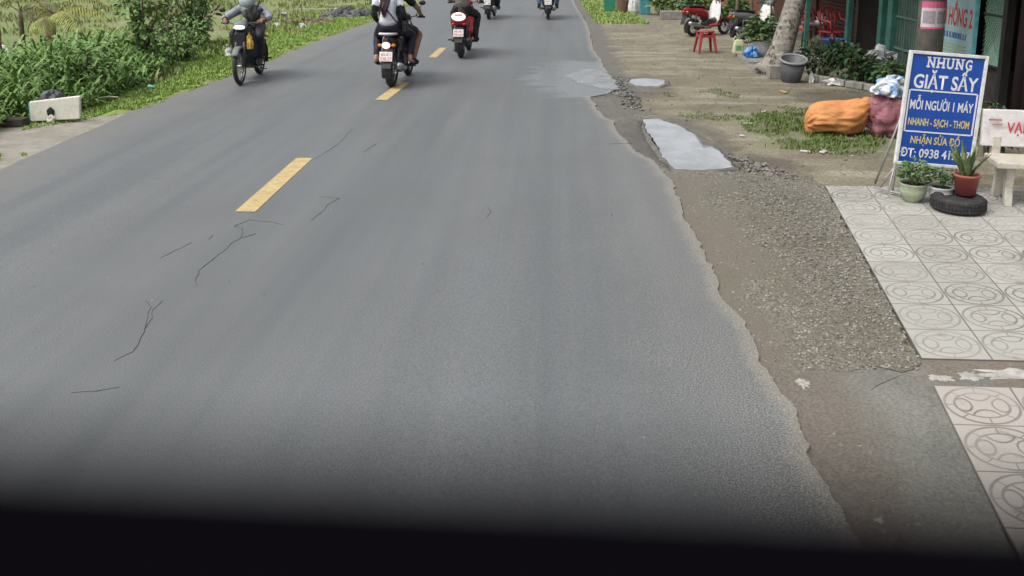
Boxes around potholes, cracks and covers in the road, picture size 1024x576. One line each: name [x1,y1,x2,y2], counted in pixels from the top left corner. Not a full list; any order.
crack [114,300,162,361]
crack [160,220,283,284]
